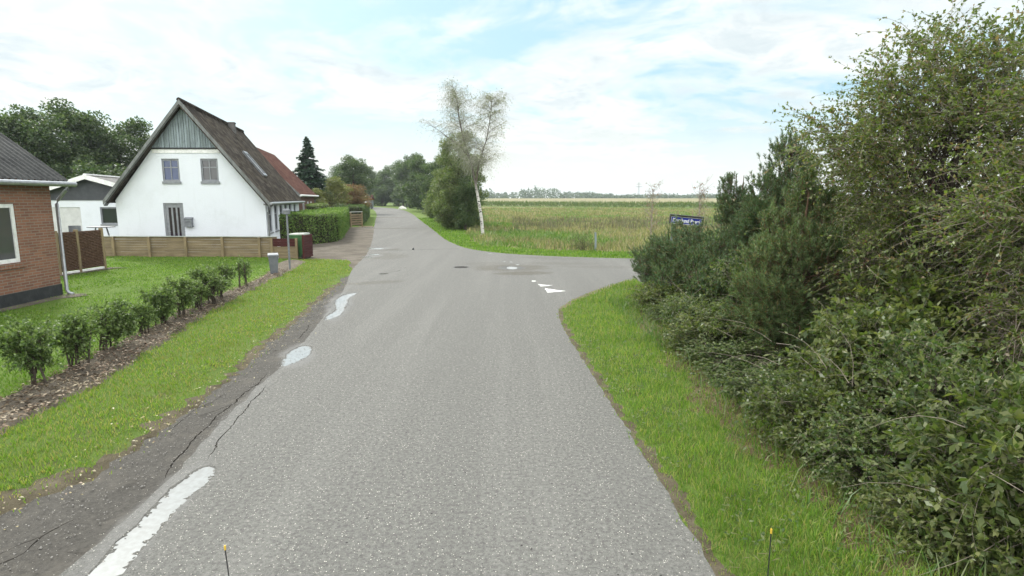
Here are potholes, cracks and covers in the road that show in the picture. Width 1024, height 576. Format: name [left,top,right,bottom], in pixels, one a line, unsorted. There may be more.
crack [163,375,267,480]
crack [0,518,76,564]
